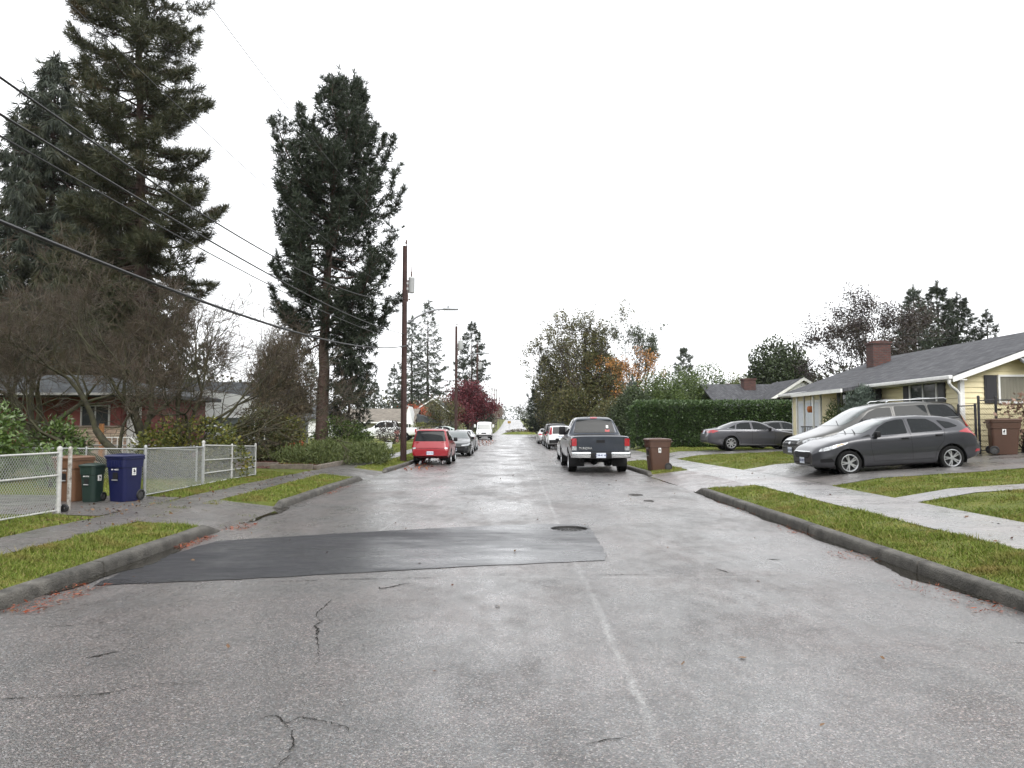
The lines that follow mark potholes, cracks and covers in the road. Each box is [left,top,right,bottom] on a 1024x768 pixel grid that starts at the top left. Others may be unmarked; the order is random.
crack [262,715,414,768]
